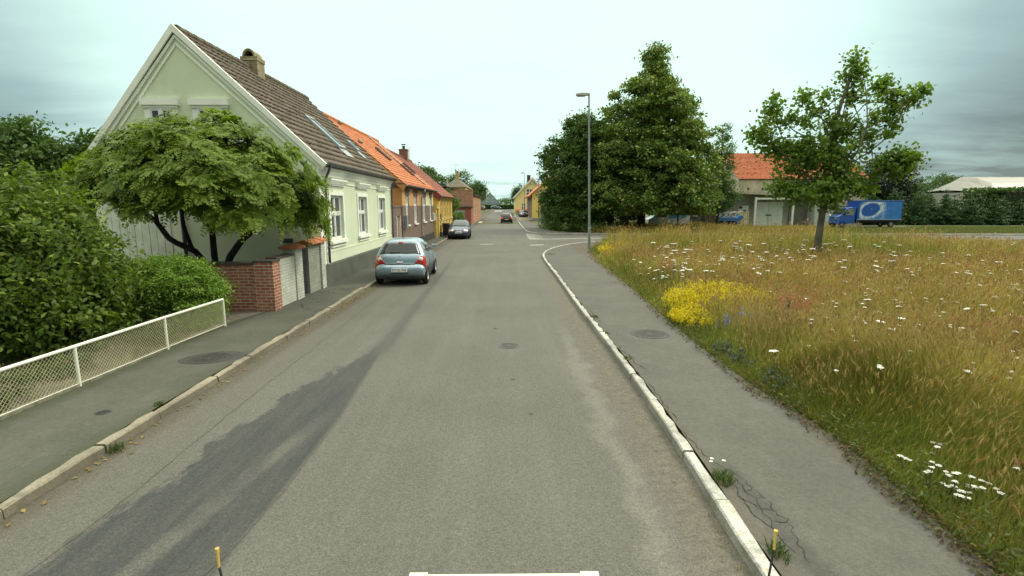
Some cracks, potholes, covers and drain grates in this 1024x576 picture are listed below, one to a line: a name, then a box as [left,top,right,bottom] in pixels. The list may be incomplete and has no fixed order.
manhole cover [177,351,247,365]
crack [681,430,810,563]
manhole cover [631,329,670,339]
